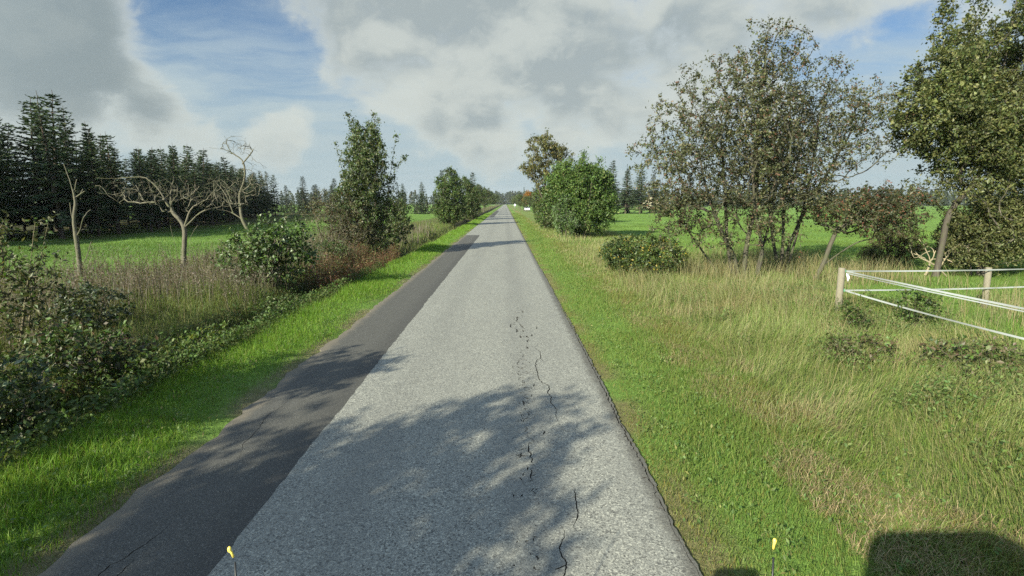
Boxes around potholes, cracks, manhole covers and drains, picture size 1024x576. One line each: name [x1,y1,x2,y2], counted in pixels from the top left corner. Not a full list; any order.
crack [98,527,167,576]
crack [512,487,578,576]
crack [510,310,563,505]
